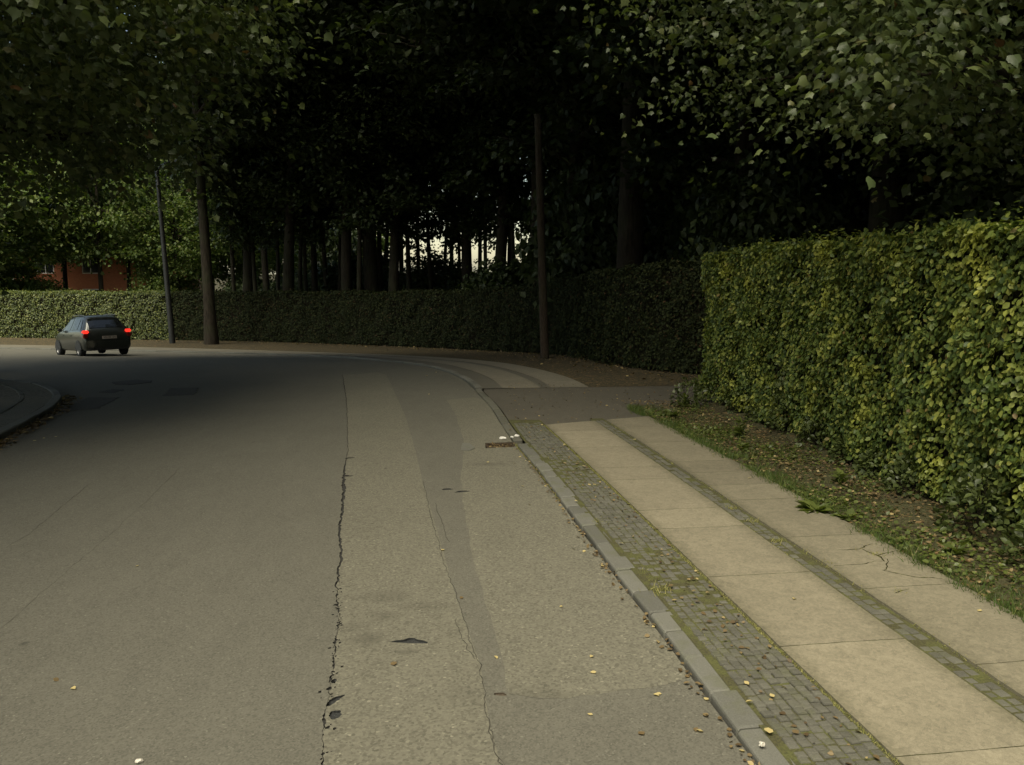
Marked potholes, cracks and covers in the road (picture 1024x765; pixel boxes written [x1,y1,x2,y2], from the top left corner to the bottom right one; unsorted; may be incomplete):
crack [835,531,943,593]
crack [318,379,355,765]
crack [423,482,503,765]
